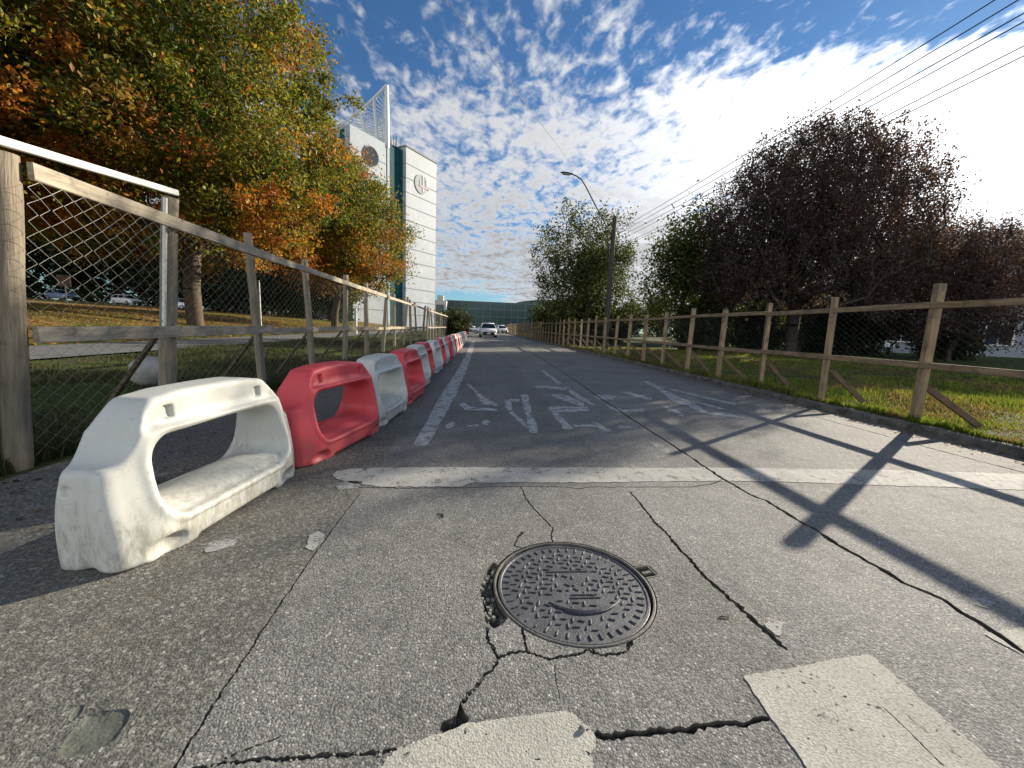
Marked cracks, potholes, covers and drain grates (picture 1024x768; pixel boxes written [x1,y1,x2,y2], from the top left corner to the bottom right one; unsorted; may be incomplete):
crack [172,350,1024,768]
manhole cover [492,543,659,652]
